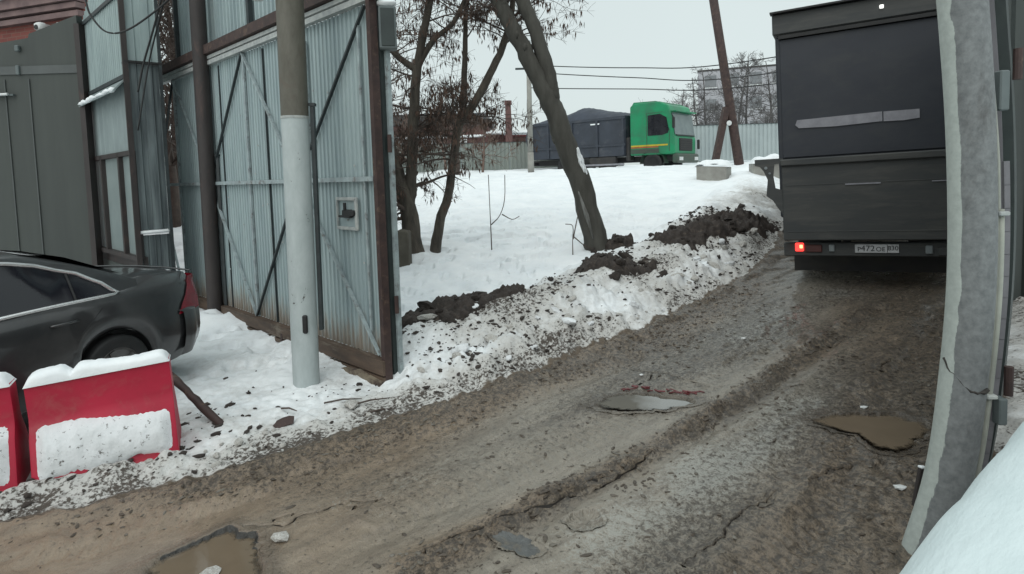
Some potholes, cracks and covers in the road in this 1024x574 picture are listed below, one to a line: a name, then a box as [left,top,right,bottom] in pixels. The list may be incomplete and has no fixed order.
crack [679,489,784,568]
pothole [585,391,706,415]
pothole [133,520,273,574]
crack [245,498,377,531]
pothole [485,525,547,558]
crack [425,450,656,554]
pothole [799,408,933,457]
